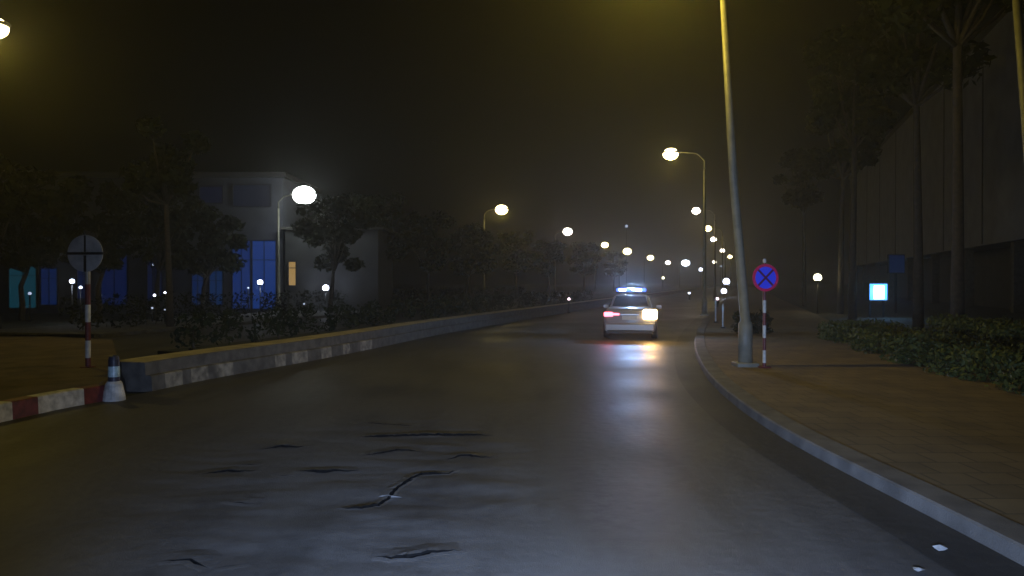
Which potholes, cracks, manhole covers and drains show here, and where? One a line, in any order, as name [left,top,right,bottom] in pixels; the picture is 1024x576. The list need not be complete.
crack [156,549,251,572]
crack [371,542,467,563]
crack [192,420,499,510]
